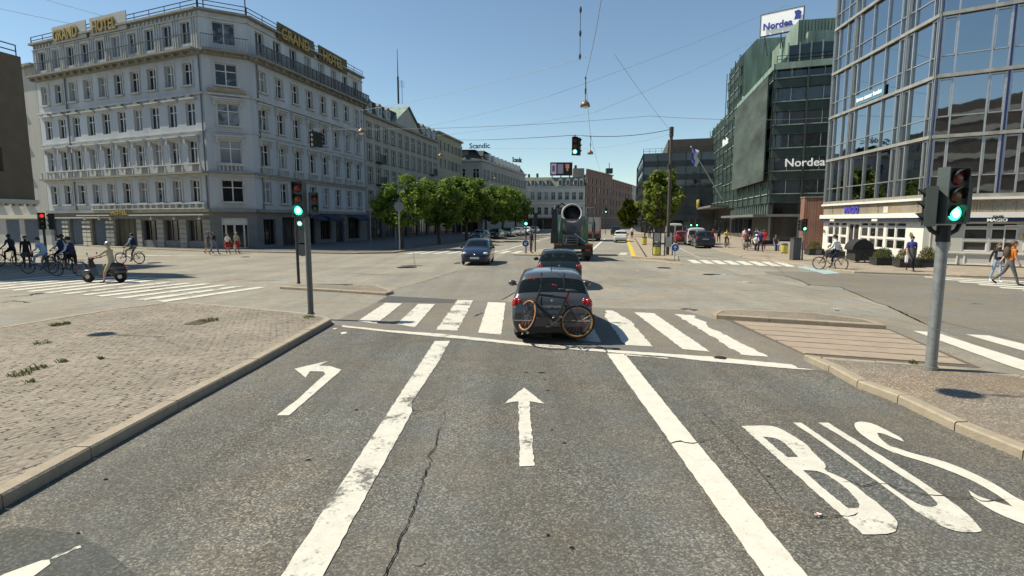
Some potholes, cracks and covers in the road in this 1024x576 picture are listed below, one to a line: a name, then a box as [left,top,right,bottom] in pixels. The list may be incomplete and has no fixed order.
crack [383,412,445,576]
crack [842,481,1002,501]
